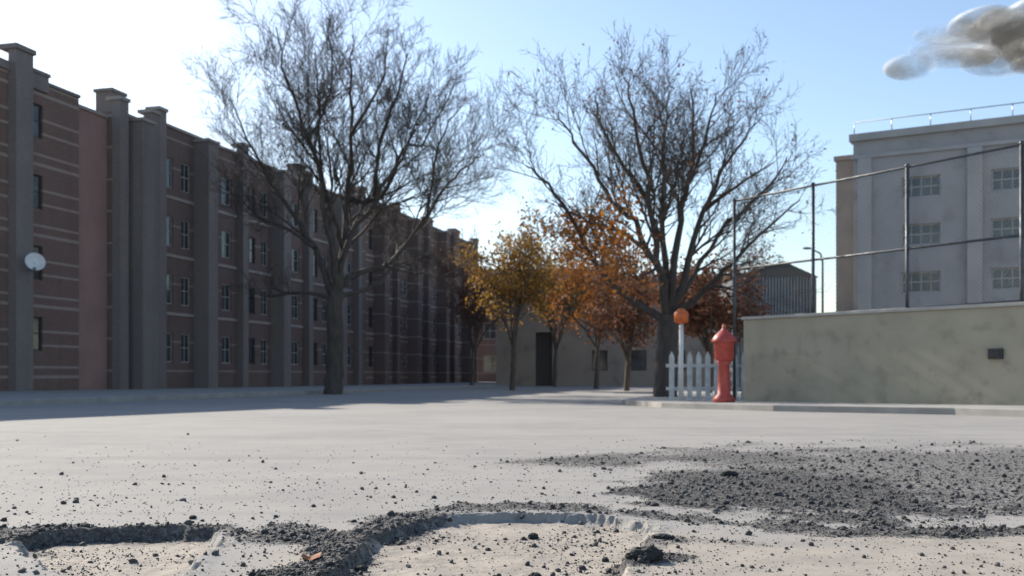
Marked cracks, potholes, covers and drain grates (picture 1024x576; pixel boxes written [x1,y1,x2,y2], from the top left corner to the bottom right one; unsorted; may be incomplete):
pothole [8,524,229,576]
pothole [322,512,664,576]
